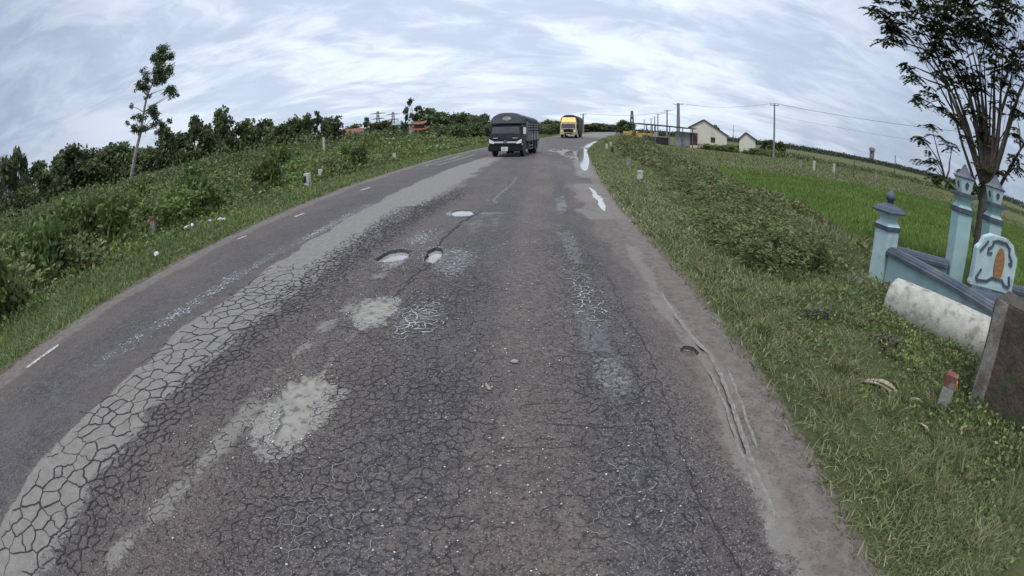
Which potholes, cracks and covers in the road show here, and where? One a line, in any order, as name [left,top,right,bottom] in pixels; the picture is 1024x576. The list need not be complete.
pothole [375,249,412,262]
crack [0,176,517,576]
crack [510,225,742,576]
pothole [424,247,443,263]
